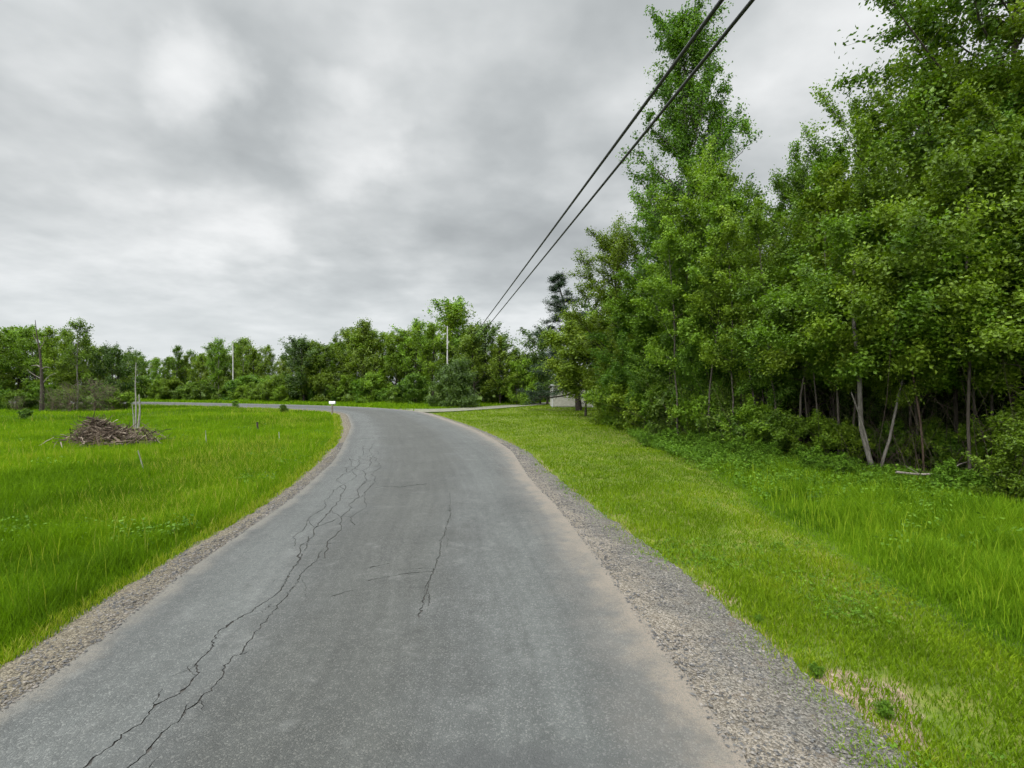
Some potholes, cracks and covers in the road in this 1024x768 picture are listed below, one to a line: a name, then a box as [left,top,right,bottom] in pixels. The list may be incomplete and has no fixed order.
crack [84,446,372,768]
crack [369,503,451,618]
